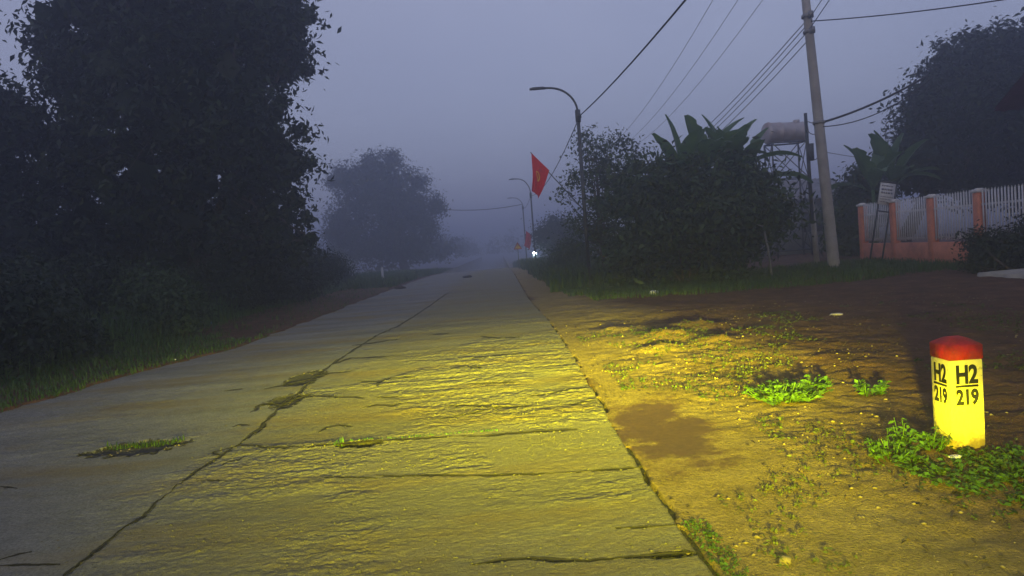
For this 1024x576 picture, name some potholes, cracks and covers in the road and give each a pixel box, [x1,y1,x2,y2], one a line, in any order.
crack [0,294,718,576]
